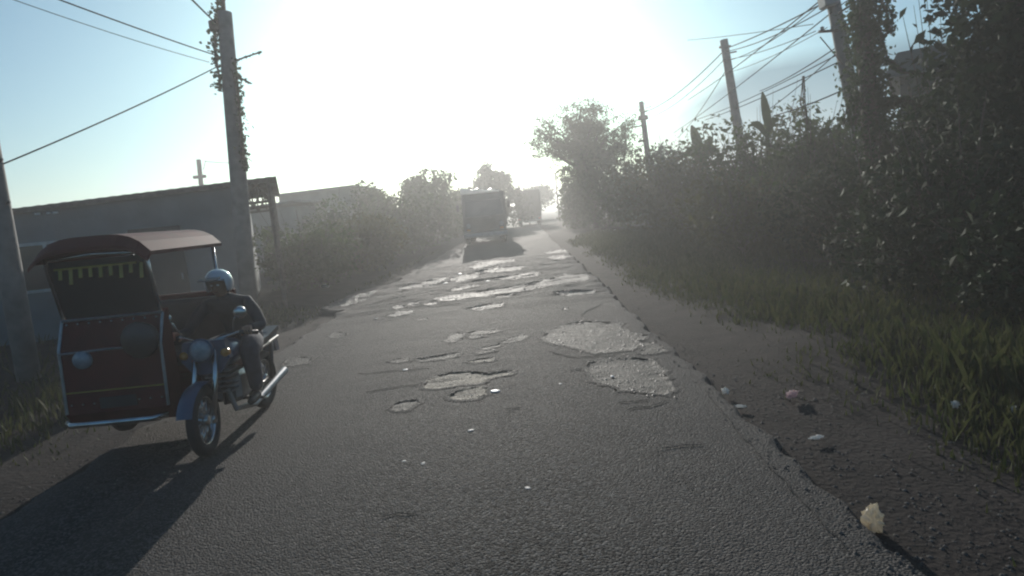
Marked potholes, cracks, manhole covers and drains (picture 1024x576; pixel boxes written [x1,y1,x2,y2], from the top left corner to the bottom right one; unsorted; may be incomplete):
pothole [497,333,532,344]
pothole [537,320,659,355]
pothole [580,356,680,397]
pothole [384,398,425,413]
pothole [441,272,482,282]
pothole [485,271,541,280]
pothole [433,274,591,302]
pothole [414,352,464,363]
pothole [442,385,493,402]
pothole [441,332,466,344]
pothole [418,369,519,390]
